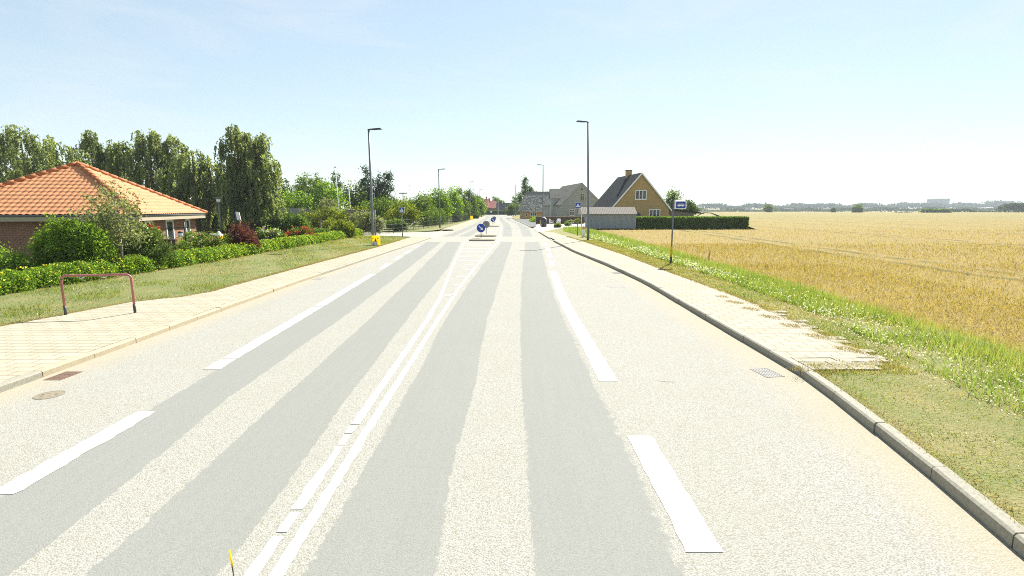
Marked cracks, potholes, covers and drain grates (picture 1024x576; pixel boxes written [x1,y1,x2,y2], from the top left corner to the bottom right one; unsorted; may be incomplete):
manhole cover [33,390,66,399]
drain grate [751,368,785,378]
drain grate [44,371,83,380]
